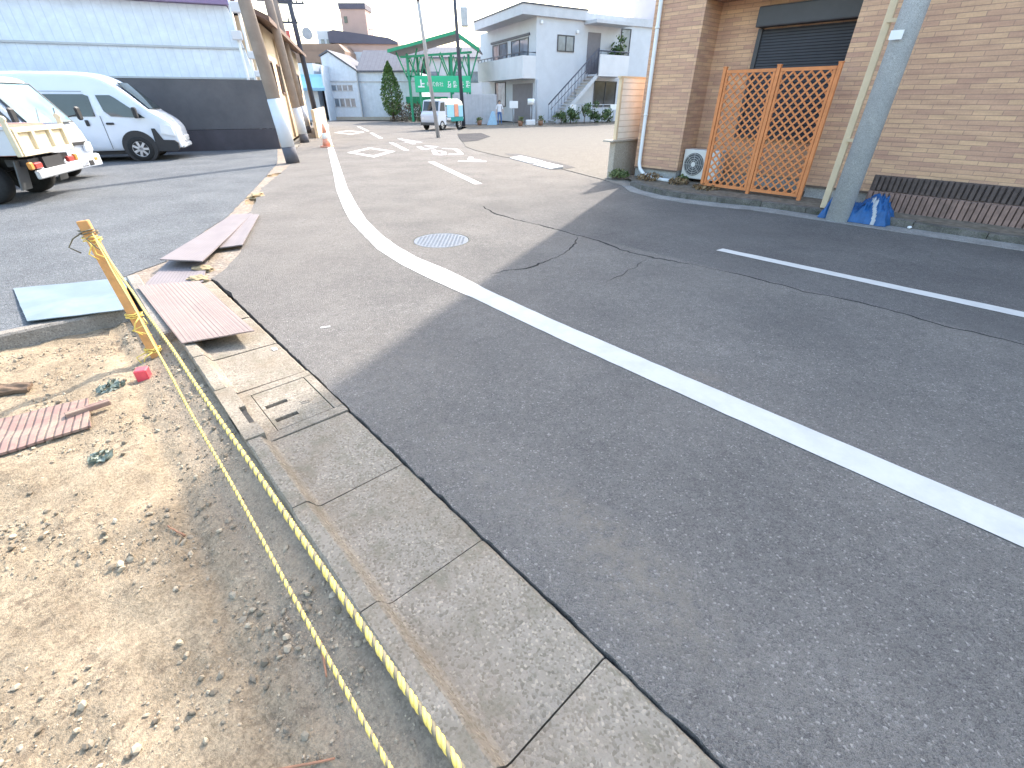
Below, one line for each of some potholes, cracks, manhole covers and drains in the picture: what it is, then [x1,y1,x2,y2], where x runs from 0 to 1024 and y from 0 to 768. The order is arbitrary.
manhole cover [411,233,471,248]
drain grate [214,347,349,447]
crack [484,207,1024,345]
